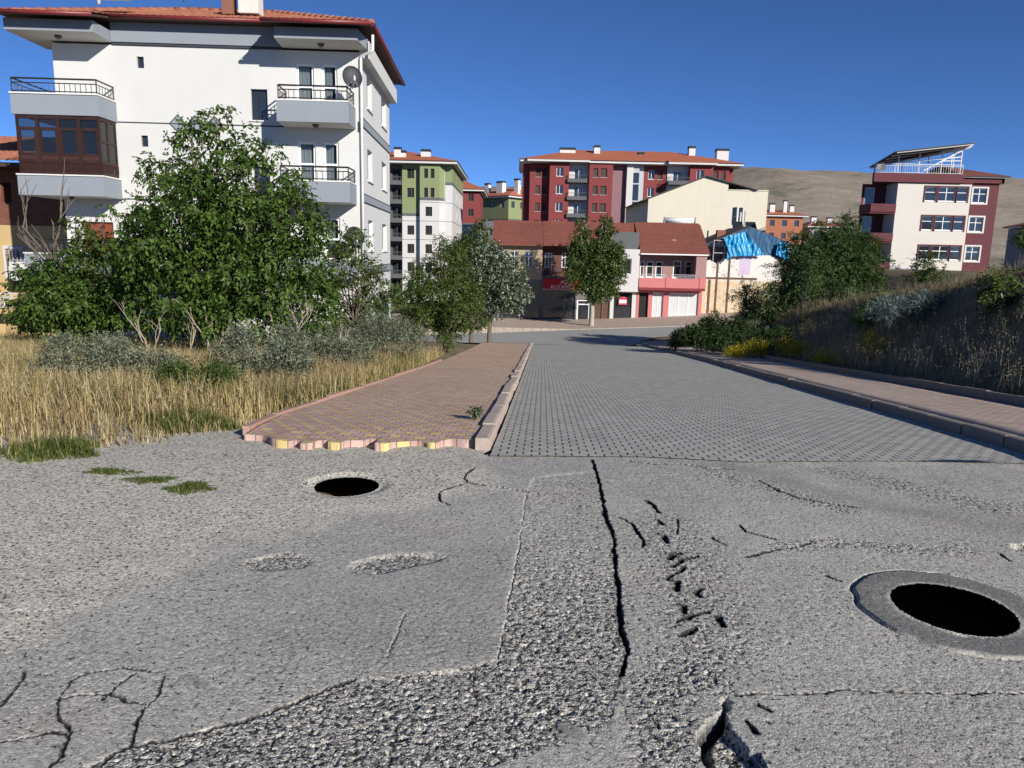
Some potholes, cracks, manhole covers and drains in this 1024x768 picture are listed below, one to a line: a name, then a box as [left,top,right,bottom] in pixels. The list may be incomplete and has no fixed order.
pothole [239,550,319,572]
crack [0,666,355,768]
crack [438,469,529,660]
crack [733,688,1024,735]
pothole [697,696,768,768]
pothole [344,551,449,577]
crack [758,480,860,508]
crack [591,459,812,677]
